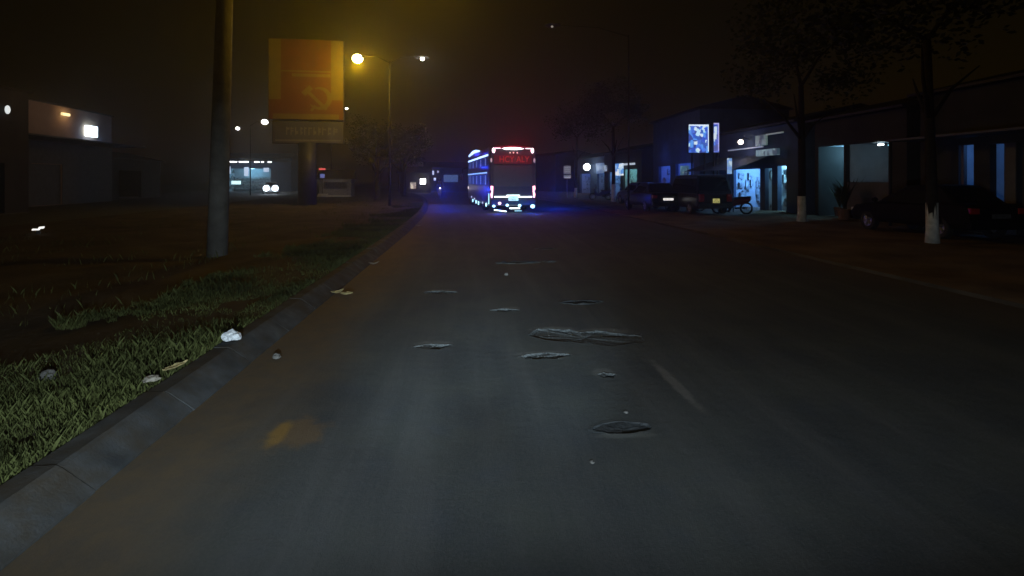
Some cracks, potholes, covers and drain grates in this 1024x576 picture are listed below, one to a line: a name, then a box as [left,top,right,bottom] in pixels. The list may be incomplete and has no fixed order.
pothole [587,419,659,437]
pothole [591,371,621,380]
pothole [410,342,456,351]
pothole [524,328,649,347]
pothole [515,351,575,361]
